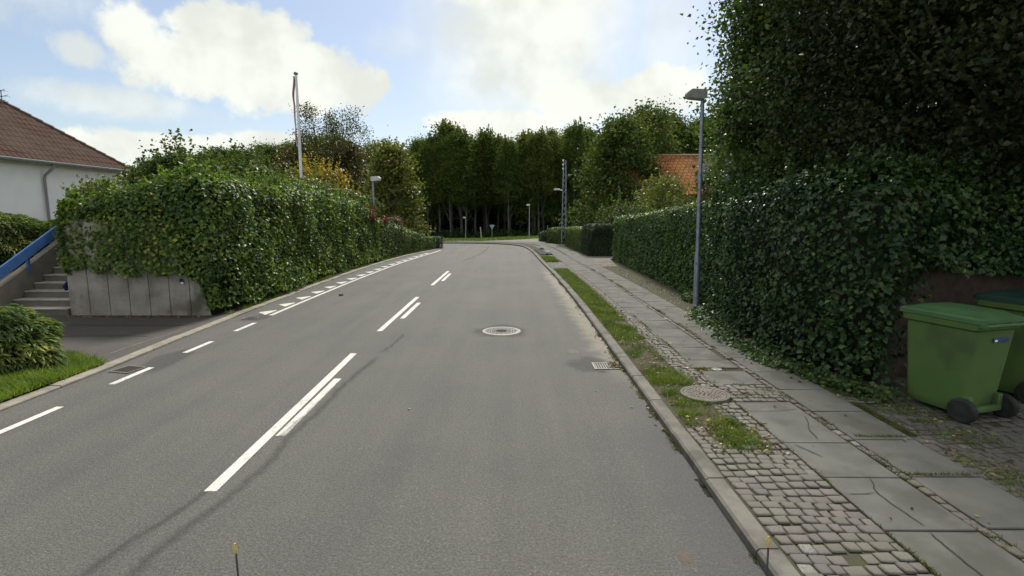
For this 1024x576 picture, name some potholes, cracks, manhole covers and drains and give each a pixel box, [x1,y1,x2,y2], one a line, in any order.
crack [748,409,823,457]
manhole cover [680,386,730,405]
drain grate [108,365,147,374]
manhole cover [482,327,521,335]
crack [851,478,983,576]
